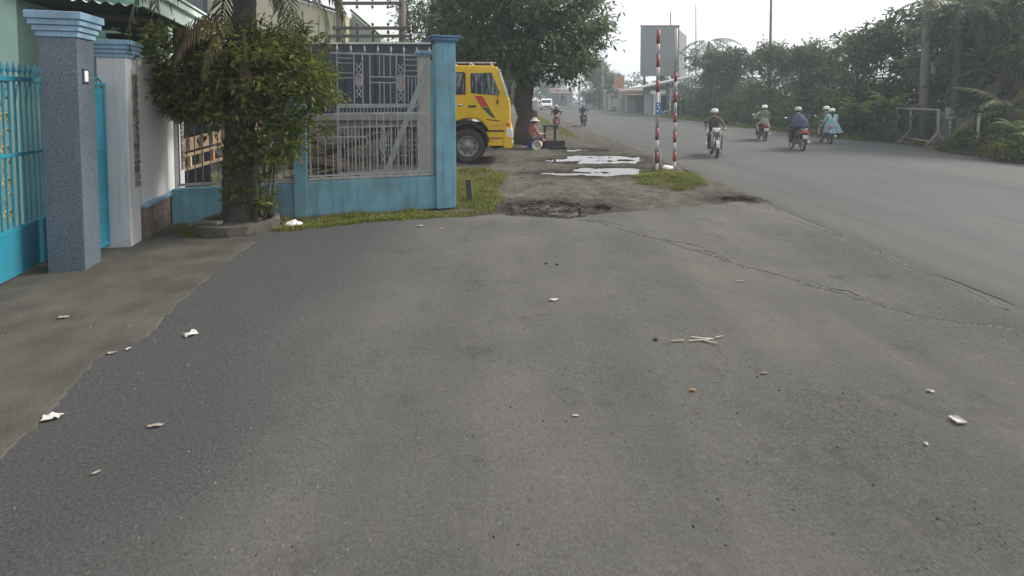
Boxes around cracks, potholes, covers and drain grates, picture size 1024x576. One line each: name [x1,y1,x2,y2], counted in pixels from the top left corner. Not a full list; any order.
pothole [572,204,620,215]
pothole [714,196,762,204]
pothole [488,198,592,219]
crack [577,218,1013,330]
